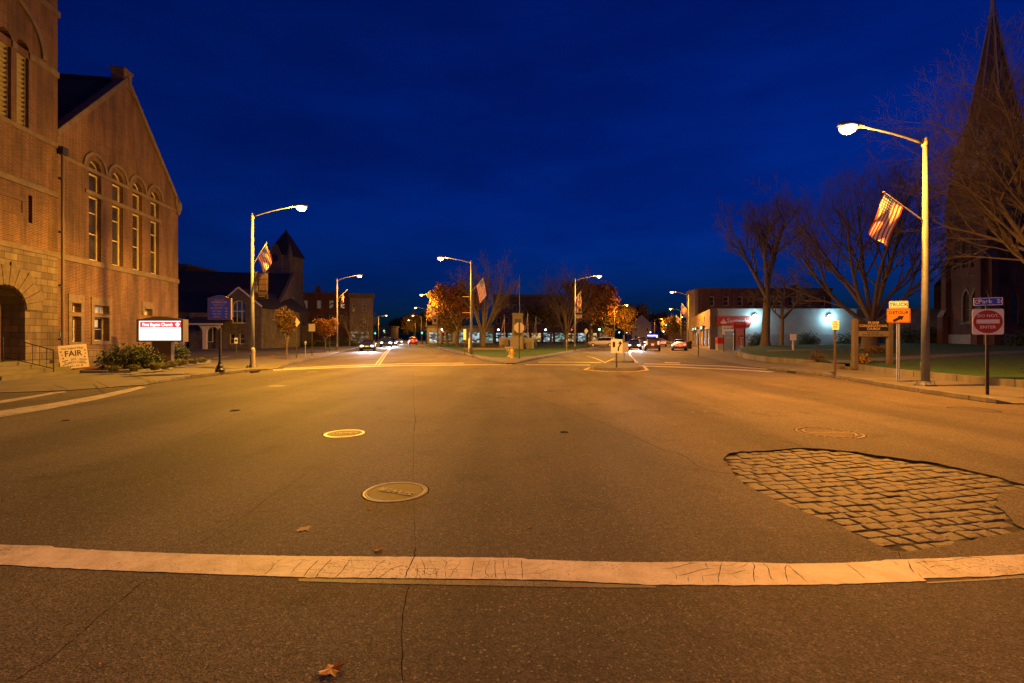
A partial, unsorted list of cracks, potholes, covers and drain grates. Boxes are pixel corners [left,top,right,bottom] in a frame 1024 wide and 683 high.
manhole cover [794,427,867,439]
pothole [723,448,1024,551]
crack [401,393,523,683]
manhole cover [361,482,429,503]
manhole cover [322,429,366,438]
